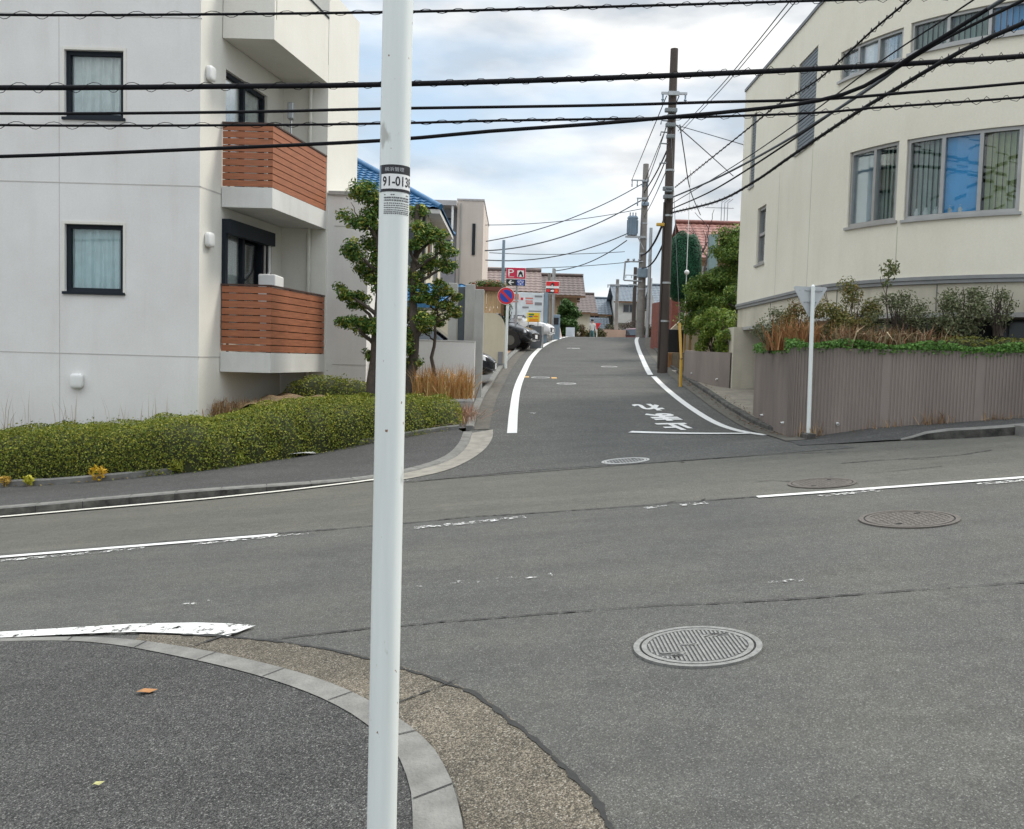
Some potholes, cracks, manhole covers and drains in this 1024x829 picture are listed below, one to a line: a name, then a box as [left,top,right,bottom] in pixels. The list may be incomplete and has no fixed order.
manhole cover [788,478,857,489]
manhole cover [633,626,763,669]
manhole cover [859,510,961,529]
